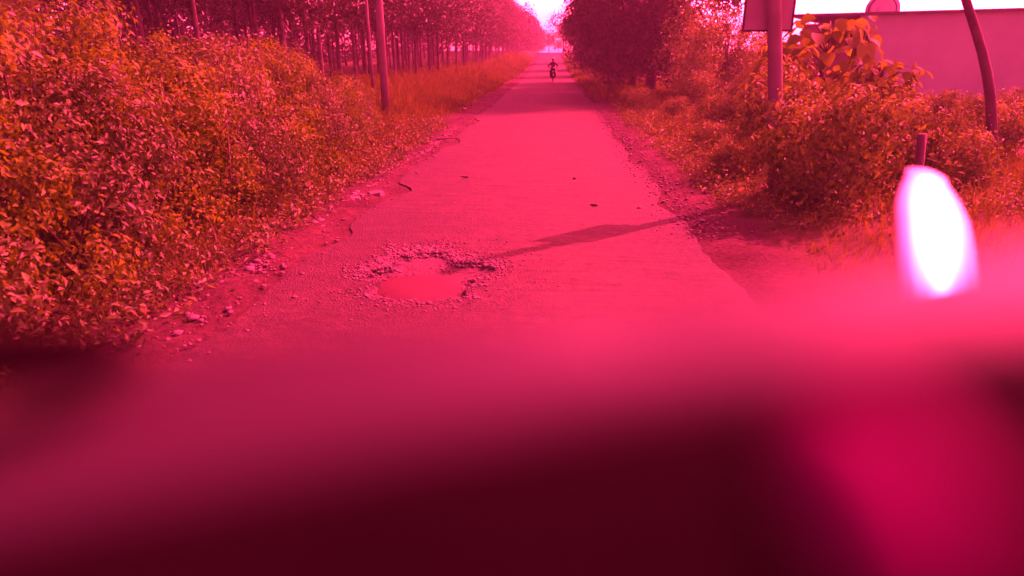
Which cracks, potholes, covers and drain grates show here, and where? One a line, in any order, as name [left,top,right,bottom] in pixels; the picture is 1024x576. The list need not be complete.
pothole [263,228,560,332]
